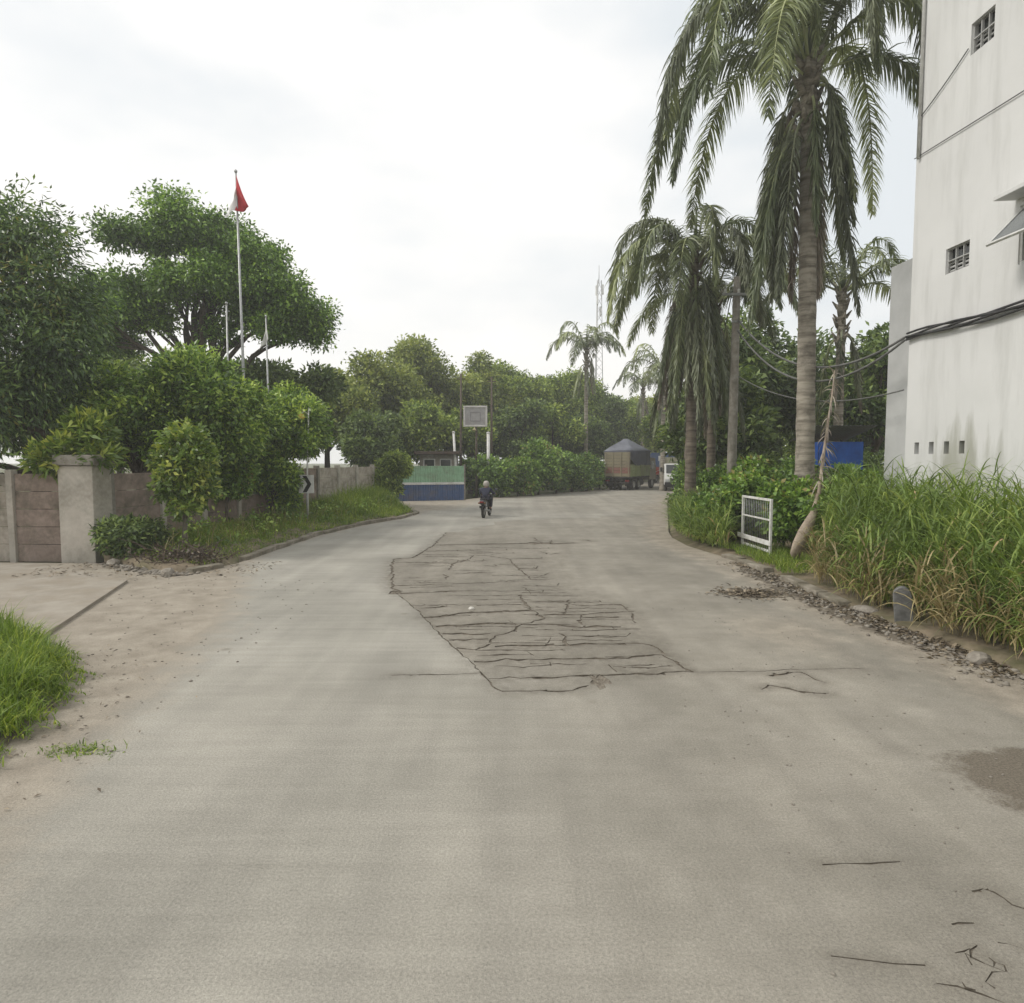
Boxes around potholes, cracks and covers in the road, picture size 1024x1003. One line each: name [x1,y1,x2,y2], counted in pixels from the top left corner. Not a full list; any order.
crack [390,533,694,692]
crack [831,955,926,966]
crack [951,888,1024,925]
crack [936,942,1021,1003]
crack [716,668,859,694]
